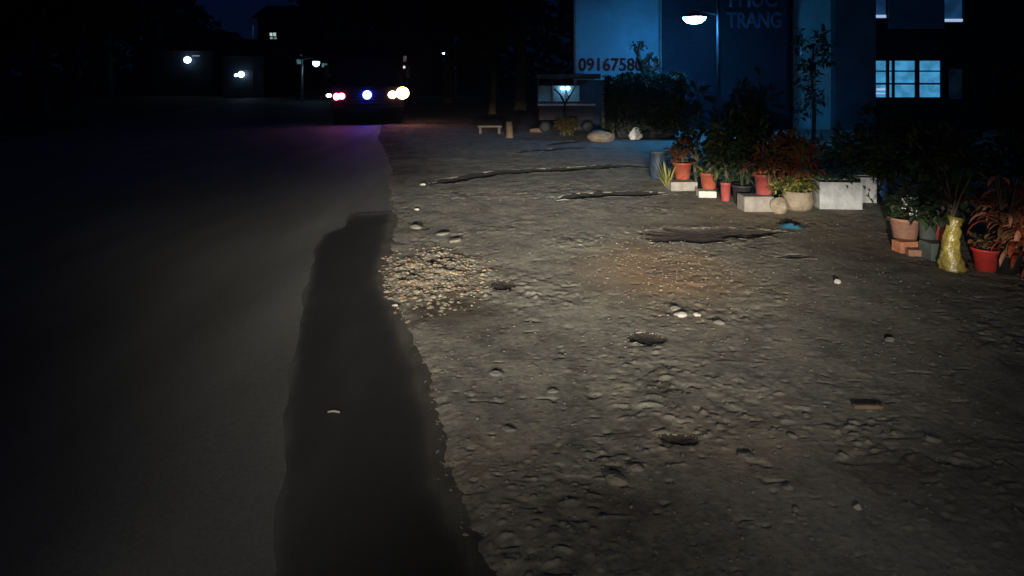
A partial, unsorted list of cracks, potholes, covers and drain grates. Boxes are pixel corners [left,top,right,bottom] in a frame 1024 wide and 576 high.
pothole [628,226,795,245]
crack [426,140,679,201]
pothole [658,433,701,447]
pothole [627,331,668,346]
pothole [491,280,515,291]
